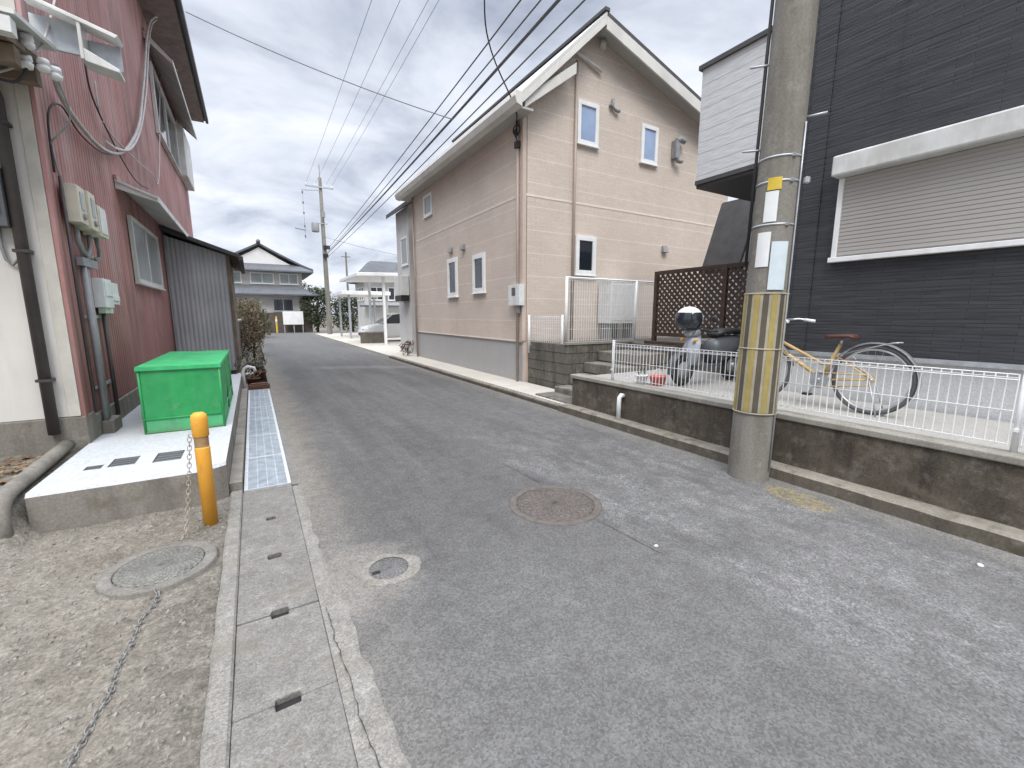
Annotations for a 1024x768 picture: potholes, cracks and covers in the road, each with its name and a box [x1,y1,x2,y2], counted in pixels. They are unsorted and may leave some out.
drain grate [245,433,284,459]
crack [326,609,381,768]
drain grate [244,453,291,493]
drain grate [248,389,271,398]
drain grate [247,406,276,420]
manhole cover [95,541,218,600]
drain grate [248,396,273,408]
drain grate [246,417,280,437]
manhole cover [509,485,602,526]
manhole cover [358,553,421,586]
